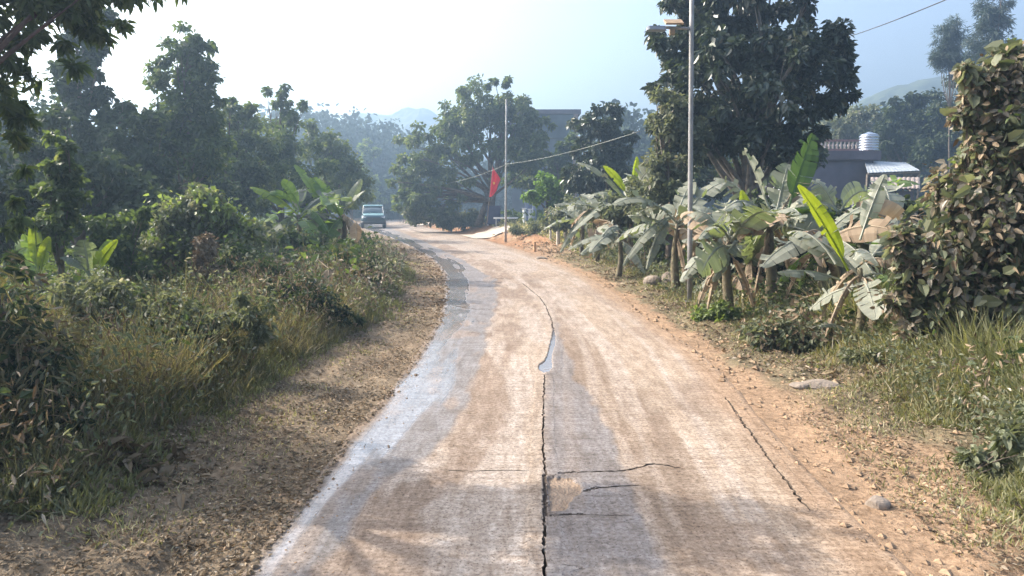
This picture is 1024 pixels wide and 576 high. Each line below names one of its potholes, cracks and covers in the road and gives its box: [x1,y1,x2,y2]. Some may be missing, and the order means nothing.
crack [716,395,819,514]
crack [433,374,693,576]
